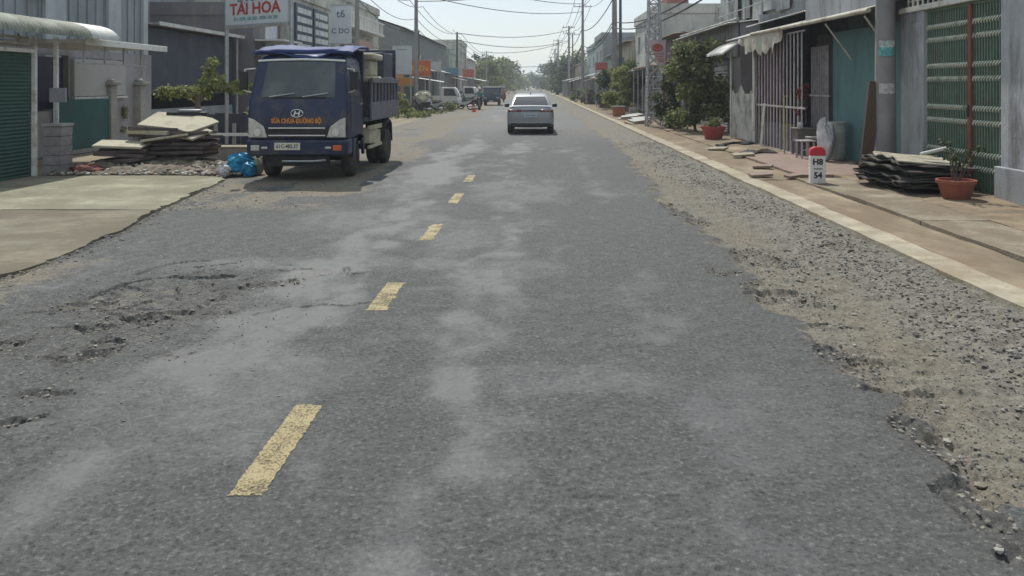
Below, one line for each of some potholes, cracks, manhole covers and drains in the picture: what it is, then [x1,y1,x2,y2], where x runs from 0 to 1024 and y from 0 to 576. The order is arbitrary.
pothole [75,338,131,363]
pothole [812,344,896,386]
pothole [858,383,945,402]
pothole [235,279,303,292]
pothole [803,321,867,332]
pothole [733,279,845,312]
pothole [51,300,120,313]
pothole [12,388,78,400]
pothole [46,323,118,334]
pothole [0,413,51,428]
pothole [97,308,196,328]
crack [0,215,372,372]
